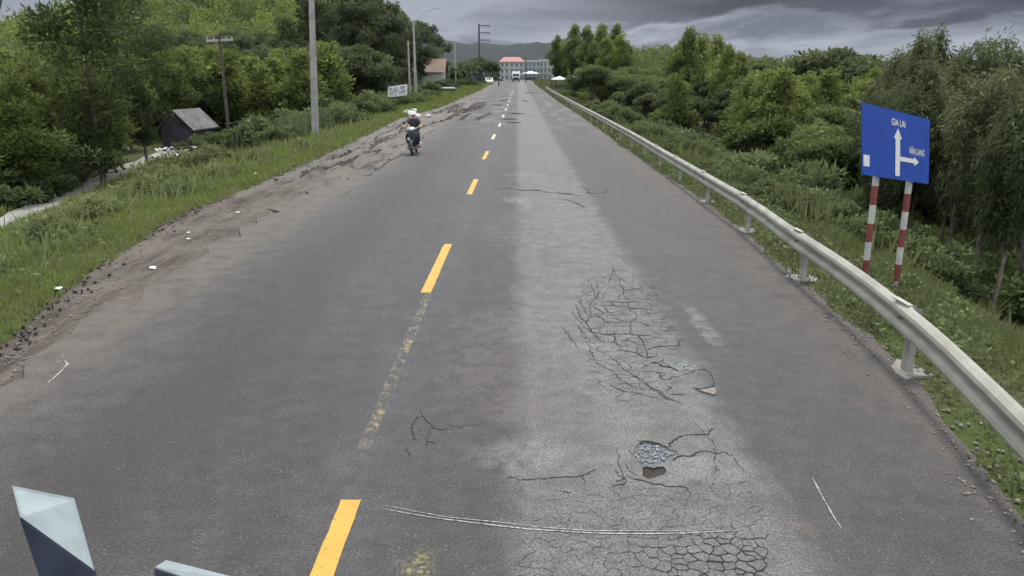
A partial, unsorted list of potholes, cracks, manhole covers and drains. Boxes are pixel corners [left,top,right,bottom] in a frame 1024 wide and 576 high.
crack [345,153,405,194]
pothole [642,466,667,479]
crack [406,409,480,456]
crack [509,469,597,493]
crack [518,477,772,576]
crack [562,267,694,406]
crack [499,186,608,208]
pothole [632,442,679,465]
crack [613,423,739,496]
